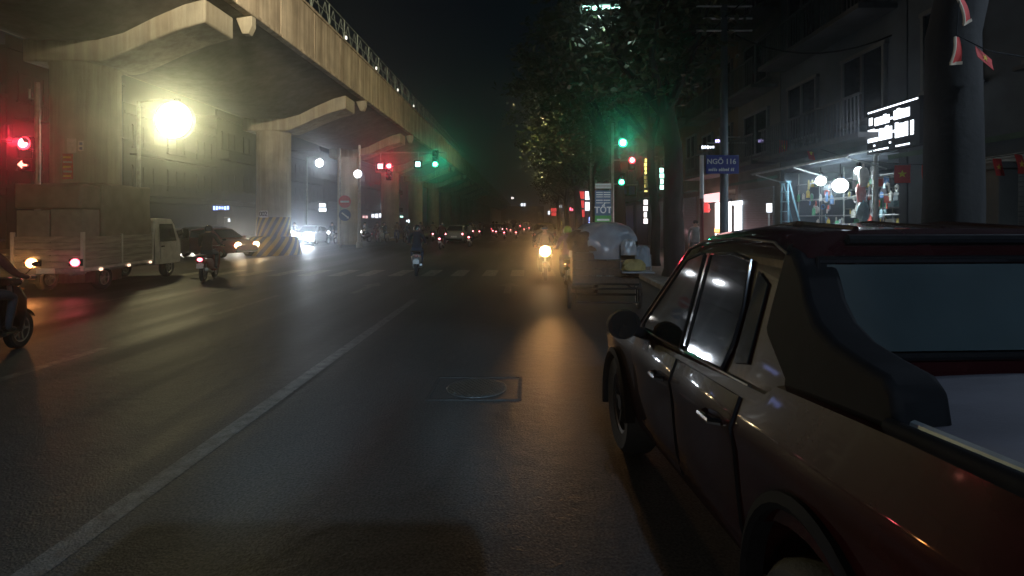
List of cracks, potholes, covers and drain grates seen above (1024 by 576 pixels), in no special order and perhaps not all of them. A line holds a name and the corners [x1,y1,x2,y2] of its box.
manhole cover [425,377,522,400]
